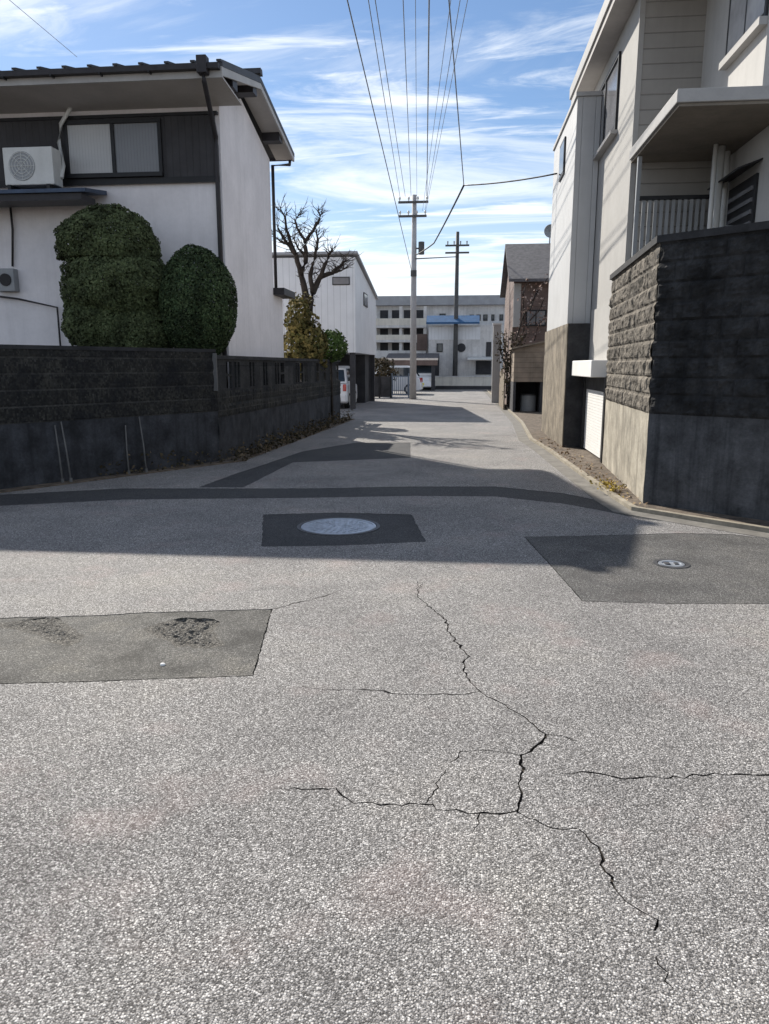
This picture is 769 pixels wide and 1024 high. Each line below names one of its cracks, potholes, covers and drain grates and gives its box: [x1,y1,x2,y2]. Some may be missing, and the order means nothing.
crack [275,581,769,931]
utility cover [653,559,690,569]
manhole cover [297,517,380,536]
pothole [143,618,225,649]
pothole [0,617,85,646]
